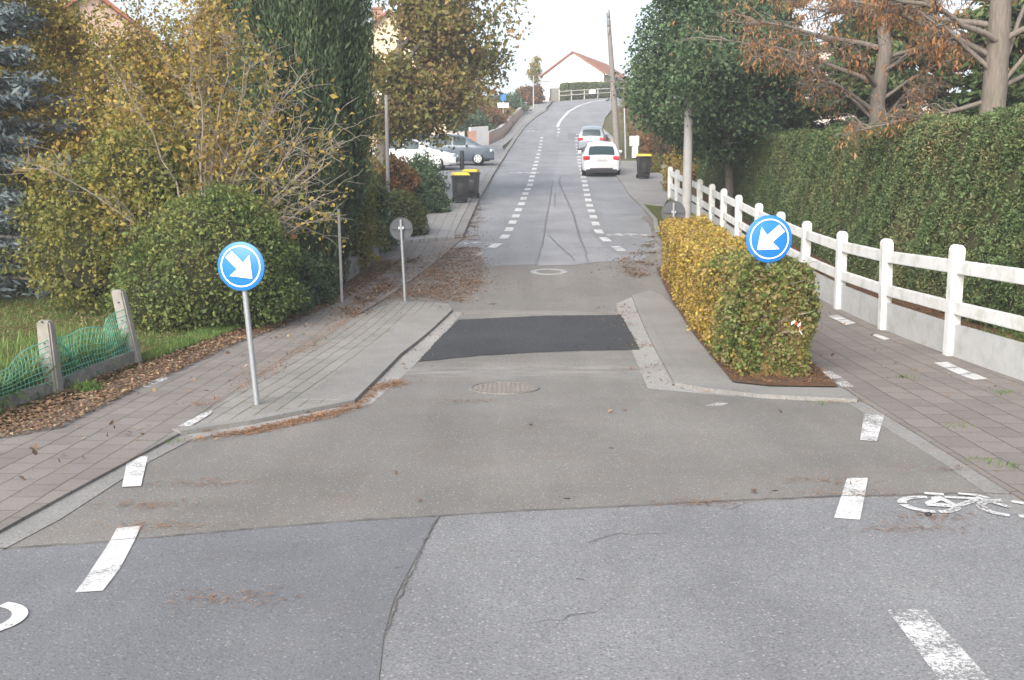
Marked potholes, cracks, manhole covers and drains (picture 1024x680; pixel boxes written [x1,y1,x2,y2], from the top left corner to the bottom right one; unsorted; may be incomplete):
manhole cover [468,381,540,394]
crack [384,515,440,635]
